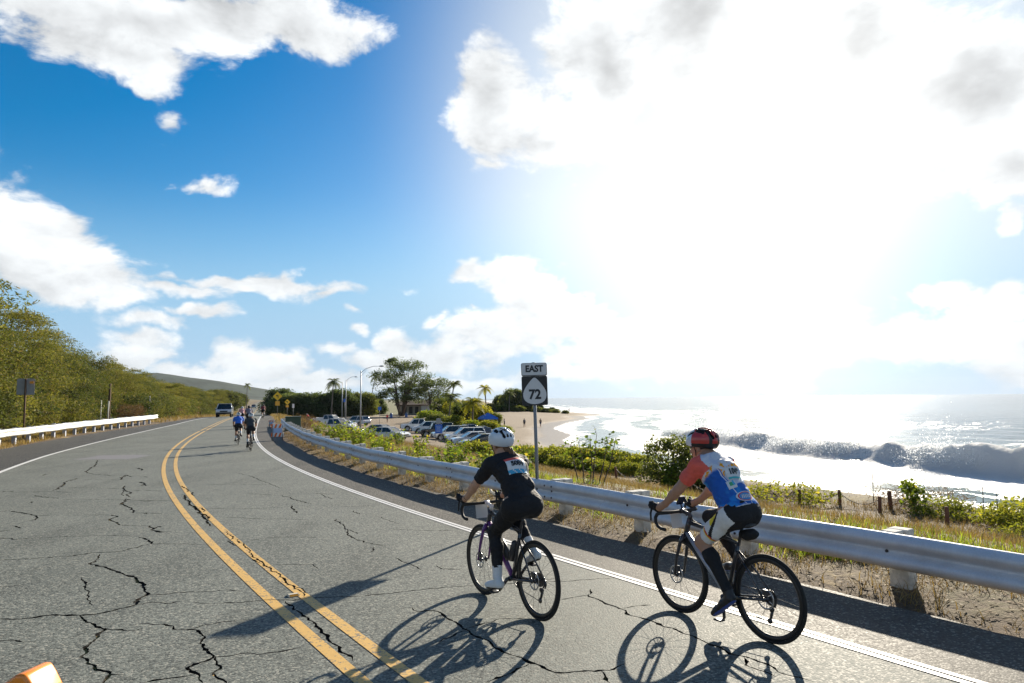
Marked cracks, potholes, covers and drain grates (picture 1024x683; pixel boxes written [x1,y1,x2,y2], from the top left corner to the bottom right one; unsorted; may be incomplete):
crack [0,460,814,683]
